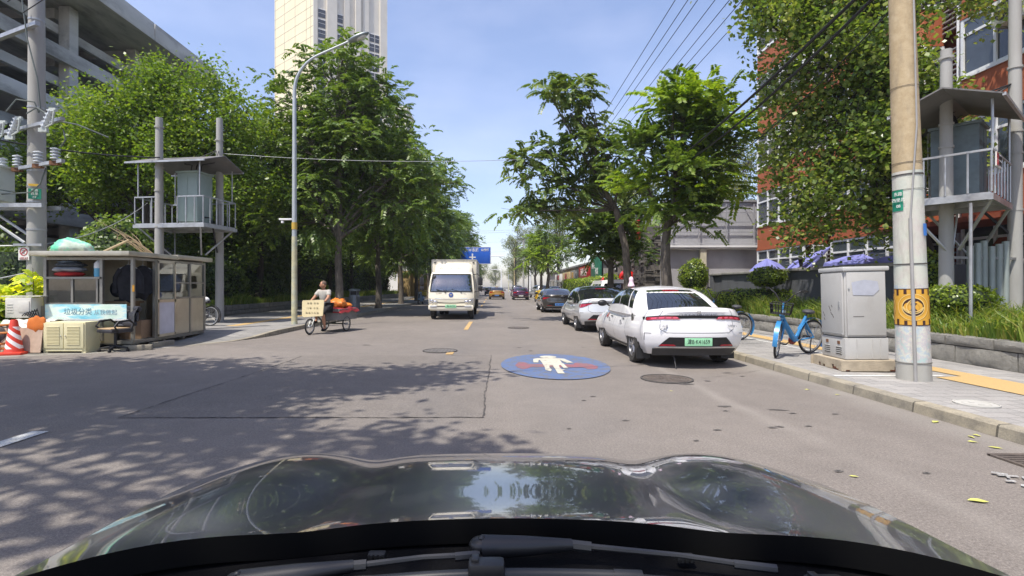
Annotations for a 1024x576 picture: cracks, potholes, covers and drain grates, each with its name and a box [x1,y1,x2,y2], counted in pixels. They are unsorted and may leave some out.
drain grate [987,453,1024,467]
manhole cover [640,374,694,384]
manhole cover [952,399,1002,409]
